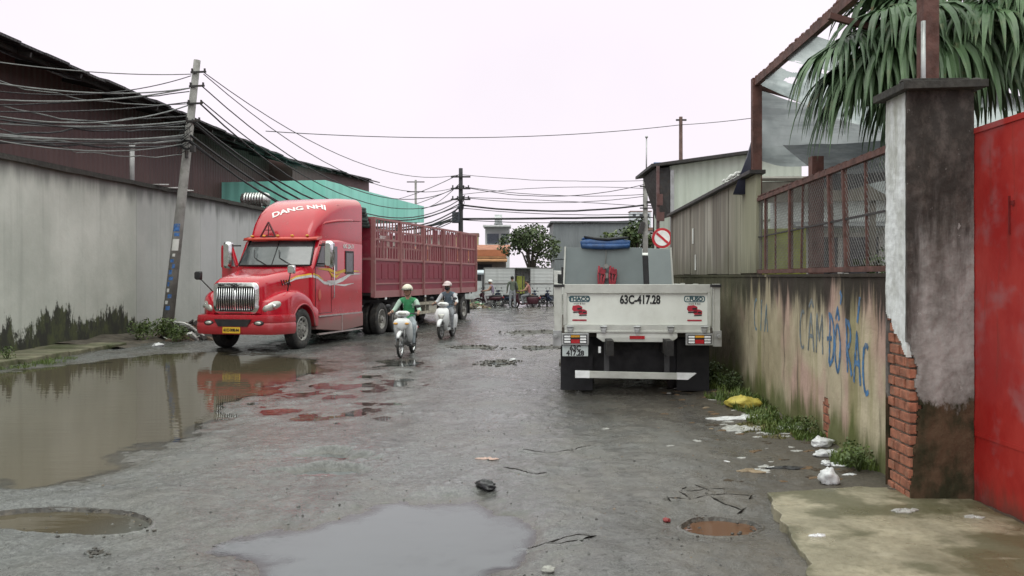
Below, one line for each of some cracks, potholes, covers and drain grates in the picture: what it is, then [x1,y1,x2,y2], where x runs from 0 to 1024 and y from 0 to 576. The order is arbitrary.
crack [524,533,594,553]
pothole [0,506,156,538]
crack [498,445,594,477]
pothole [472,359,523,367]
crack [667,484,753,514]
pothole [676,514,765,538]
